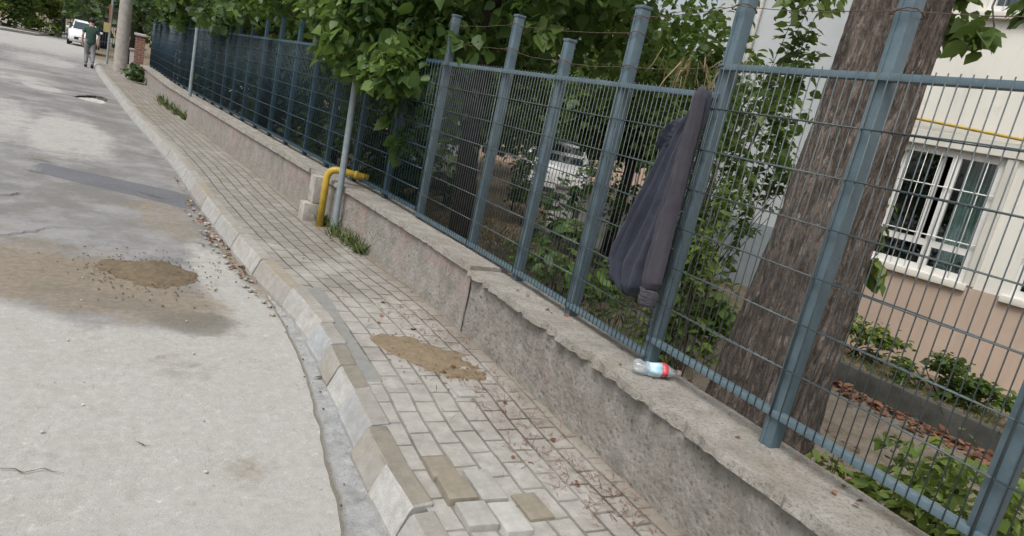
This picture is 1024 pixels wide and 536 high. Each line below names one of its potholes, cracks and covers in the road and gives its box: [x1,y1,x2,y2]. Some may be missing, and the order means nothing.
pothole [74,95,108,104]
